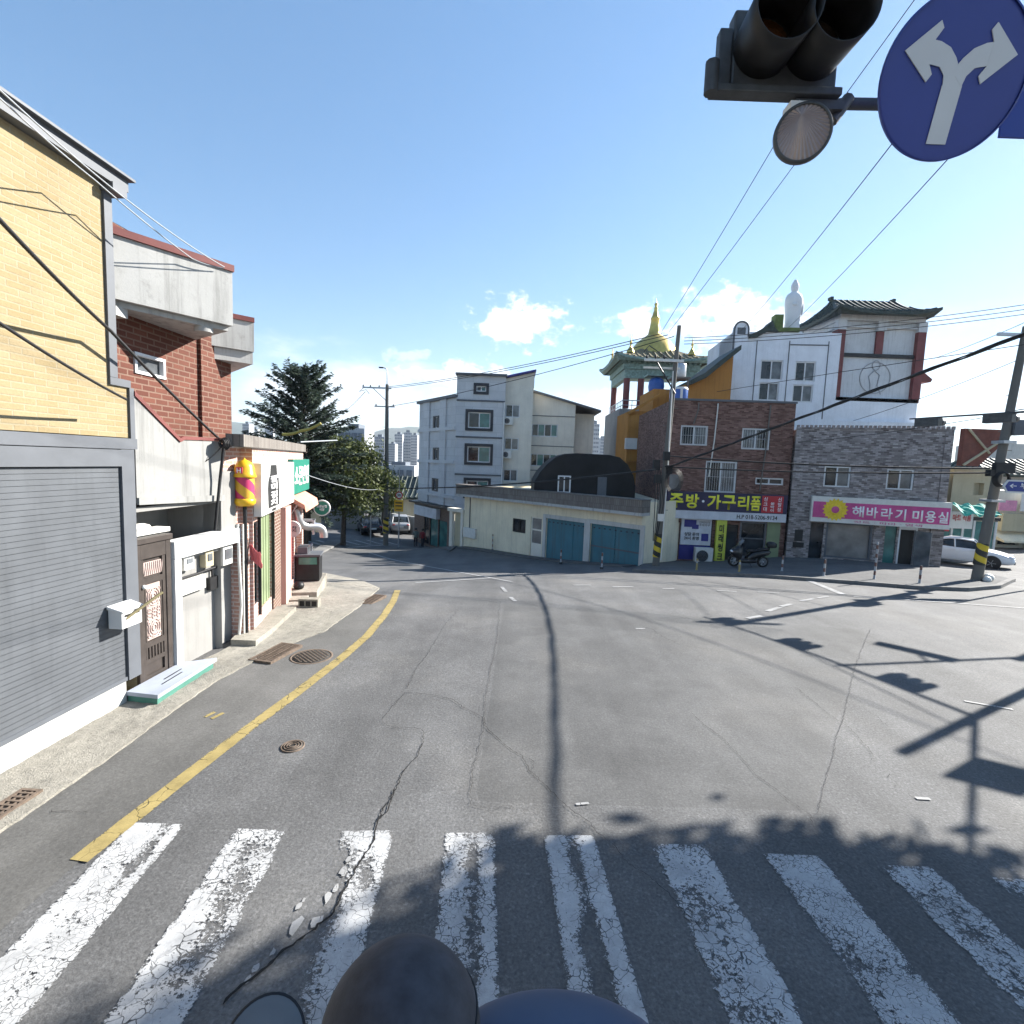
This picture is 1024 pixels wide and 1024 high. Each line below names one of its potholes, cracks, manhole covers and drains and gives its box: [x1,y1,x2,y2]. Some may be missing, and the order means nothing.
drain grate [0,788,43,820]
manhole cover [289,649,333,664]
crack [223,613,708,1004]
drain grate [363,594,387,604]
drain grate [248,642,303,664]
manhole cover [280,740,305,753]
